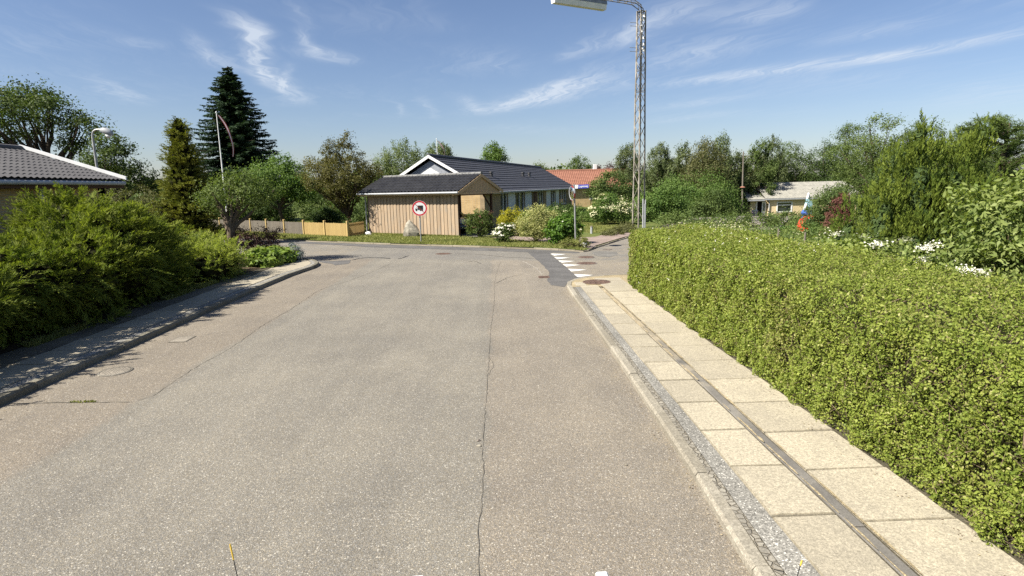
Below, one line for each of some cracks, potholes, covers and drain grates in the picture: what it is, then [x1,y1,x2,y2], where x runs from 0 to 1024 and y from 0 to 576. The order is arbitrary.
crack [477,274,521,574]
manhole cover [96,366,134,376]
